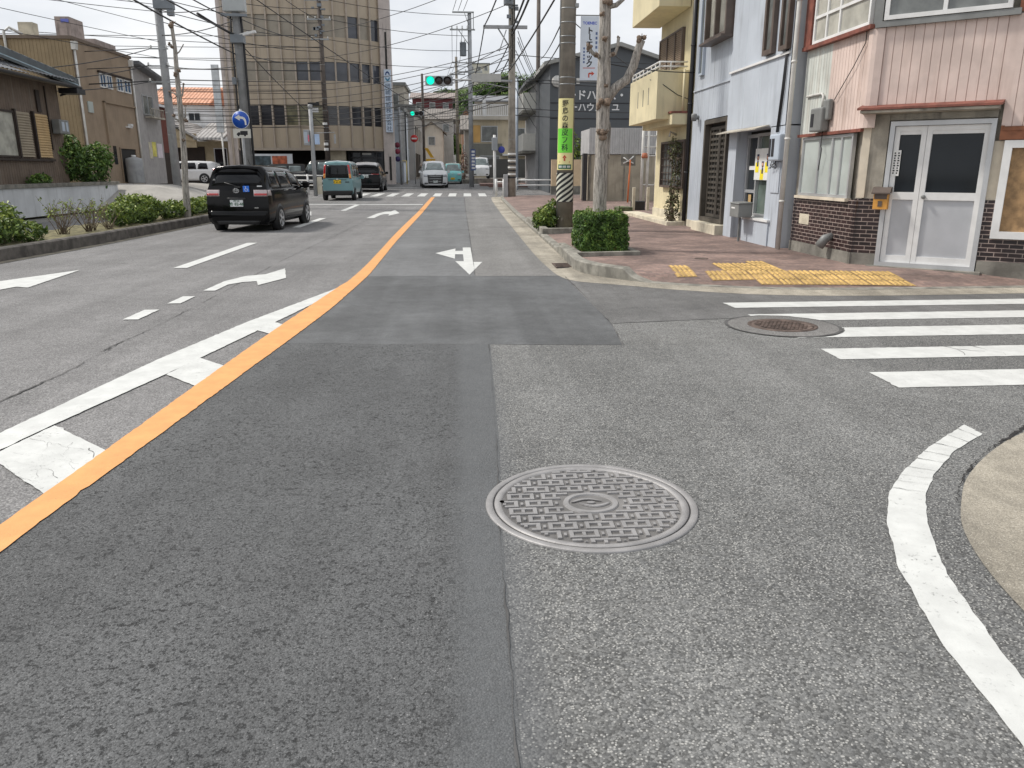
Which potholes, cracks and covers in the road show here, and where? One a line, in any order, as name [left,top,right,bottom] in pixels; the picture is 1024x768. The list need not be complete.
manhole cover [724,315,843,337]
manhole cover [486,464,698,554]
